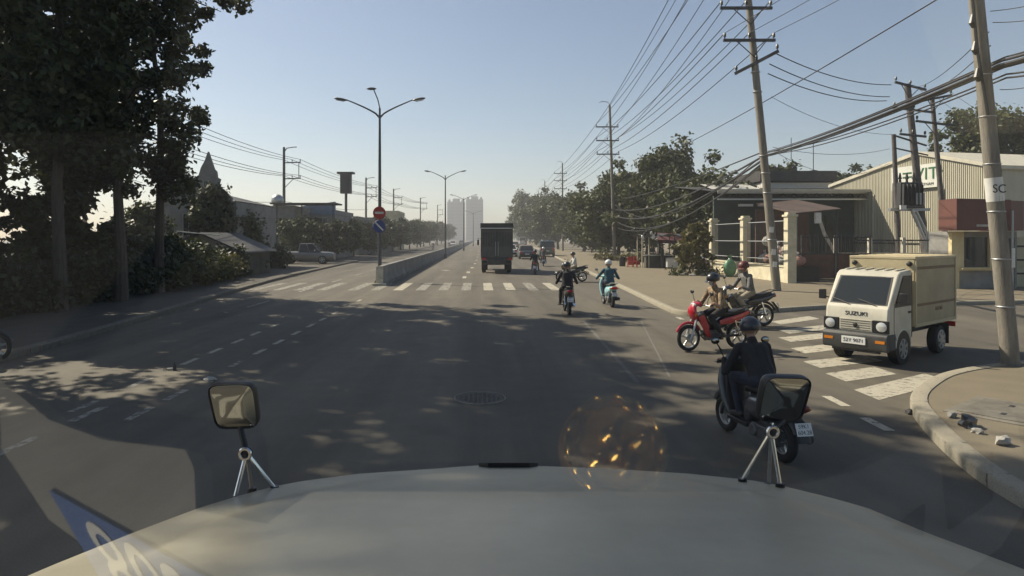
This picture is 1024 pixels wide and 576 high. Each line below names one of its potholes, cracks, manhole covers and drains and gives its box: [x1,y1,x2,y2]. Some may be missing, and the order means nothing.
manhole cover [454,391,506,405]
